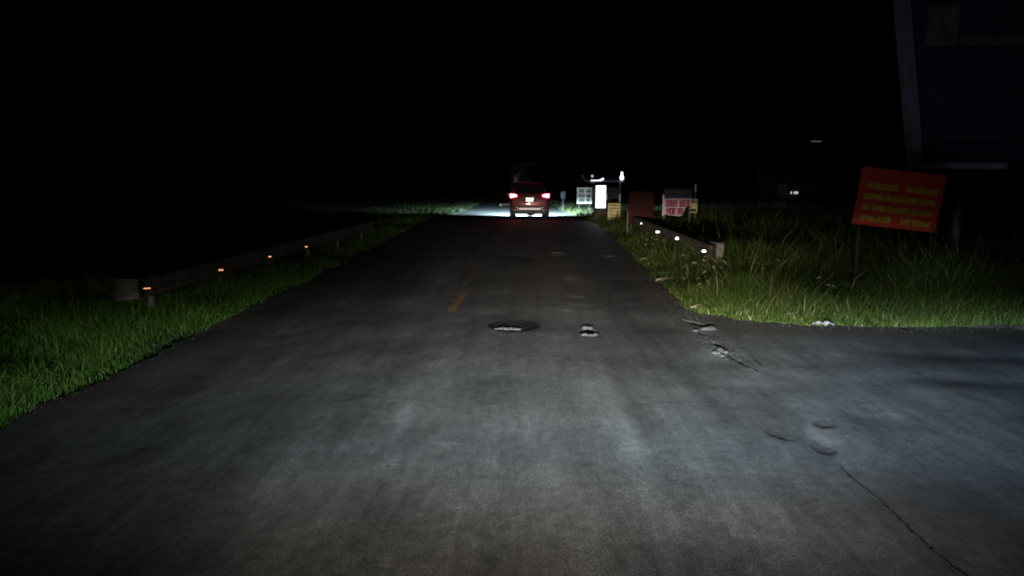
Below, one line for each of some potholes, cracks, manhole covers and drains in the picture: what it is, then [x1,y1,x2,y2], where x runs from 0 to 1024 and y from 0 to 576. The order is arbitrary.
pothole [810,444,839,456]
pothole [762,428,796,442]
pothole [812,421,836,429]
manhole cover [488,320,540,332]
pothole [709,341,728,357]
pothole [579,326,598,336]
crack [841,465,969,576]
